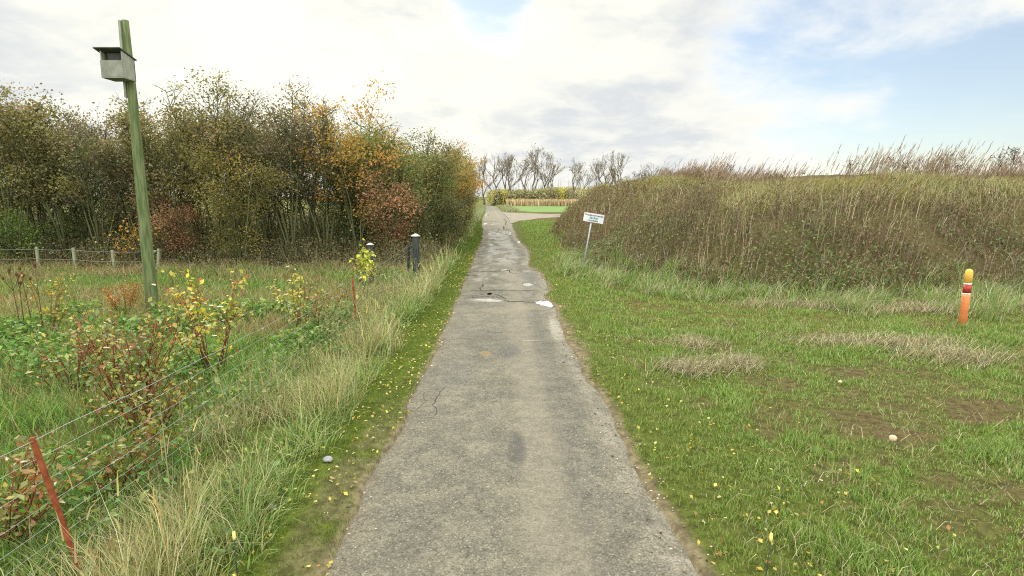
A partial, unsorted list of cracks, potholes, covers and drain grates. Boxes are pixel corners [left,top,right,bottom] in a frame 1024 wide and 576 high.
crack [467,257,536,303]
